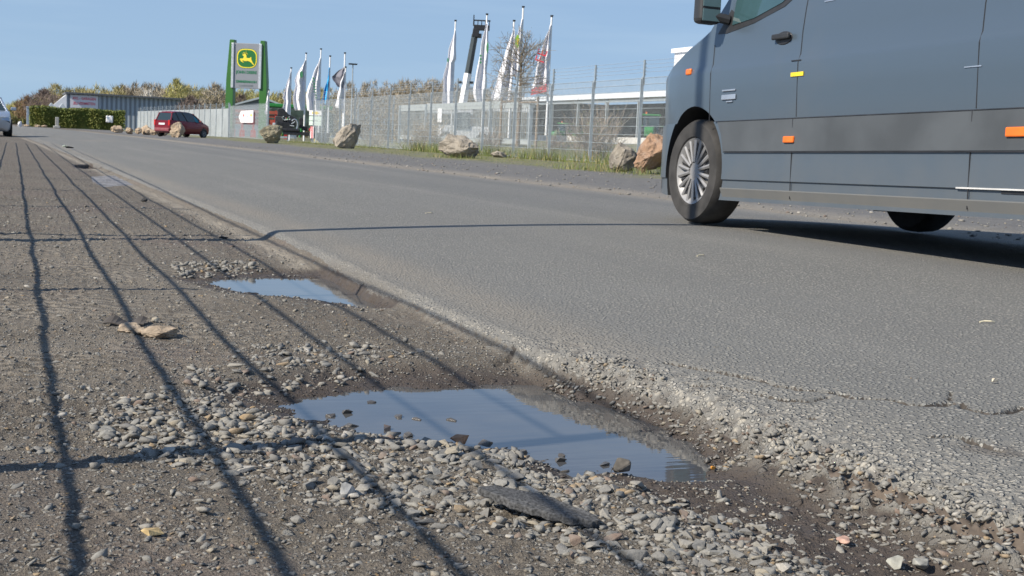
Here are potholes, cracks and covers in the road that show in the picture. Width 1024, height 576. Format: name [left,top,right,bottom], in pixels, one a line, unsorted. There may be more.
pothole [219,369,989,576]
crack [664,363,1024,415]
pothole [174,264,401,308]
